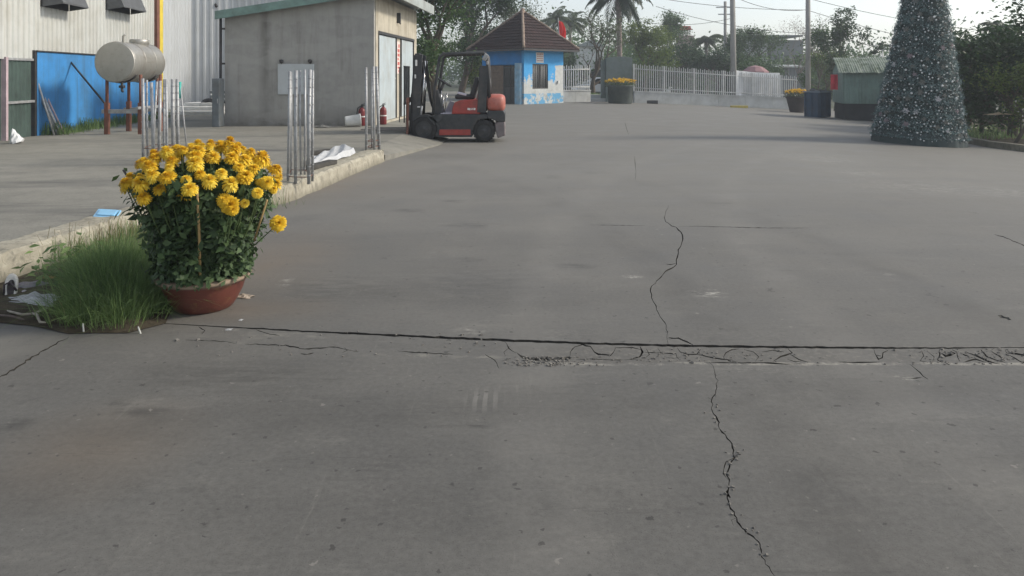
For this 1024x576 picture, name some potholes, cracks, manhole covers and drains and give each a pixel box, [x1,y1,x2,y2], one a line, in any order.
crack [486,212,806,575]
crack [845,350,888,363]
crack [911,350,1024,379]
